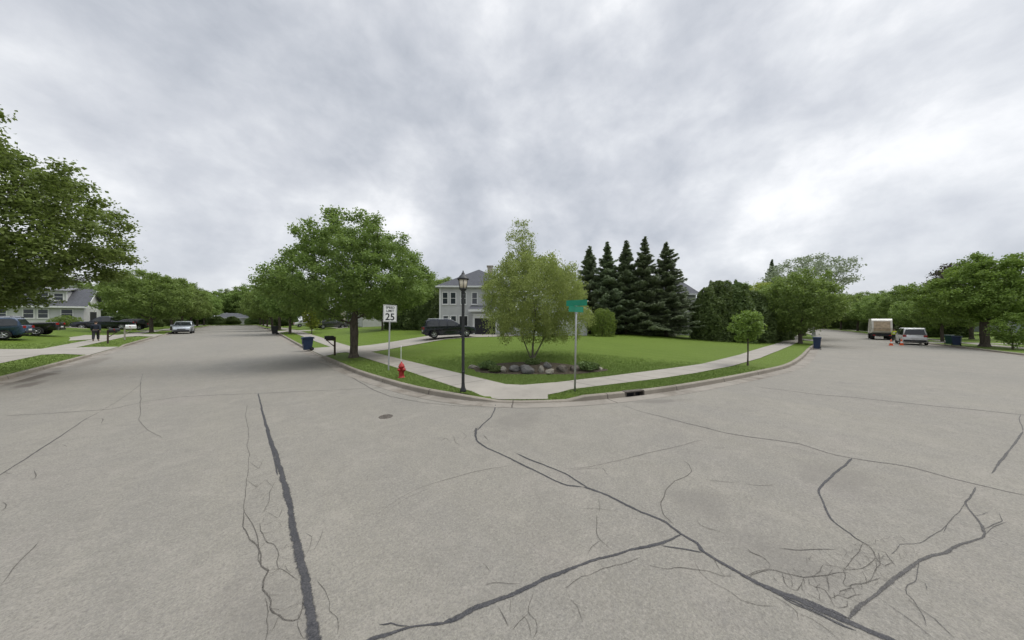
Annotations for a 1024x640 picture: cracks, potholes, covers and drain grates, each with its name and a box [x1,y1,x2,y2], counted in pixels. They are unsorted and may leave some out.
crack [565,499,637,588]
crack [242,409,339,640]
crack [651,536,918,636]
crack [486,566,537,638]
crack [660,465,692,520]
drain grate [623,389,645,397]
crack [576,406,1023,495]
